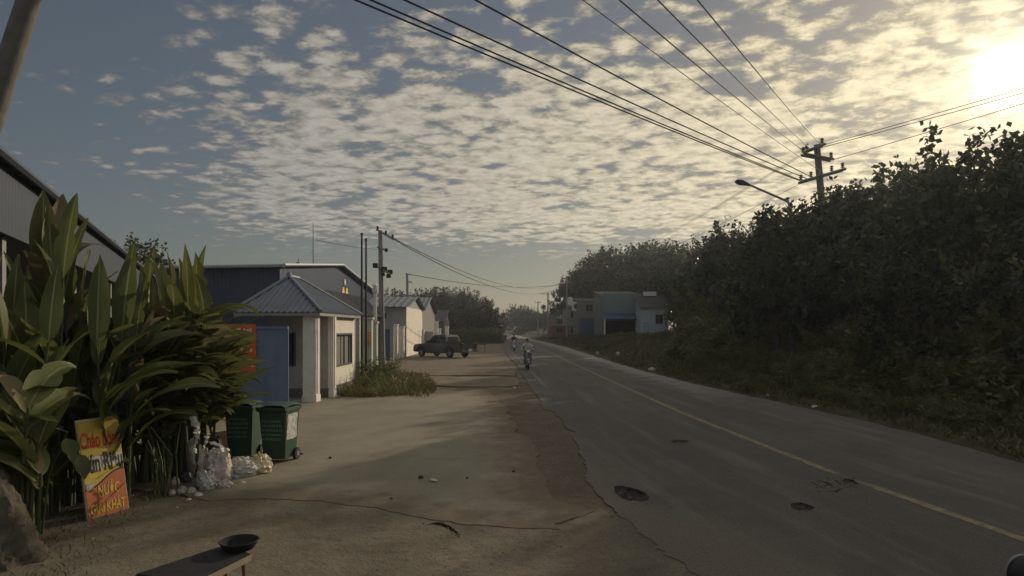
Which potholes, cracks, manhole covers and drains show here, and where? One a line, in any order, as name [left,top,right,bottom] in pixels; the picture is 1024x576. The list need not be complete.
pothole [611,484,658,504]
pothole [791,500,819,513]
